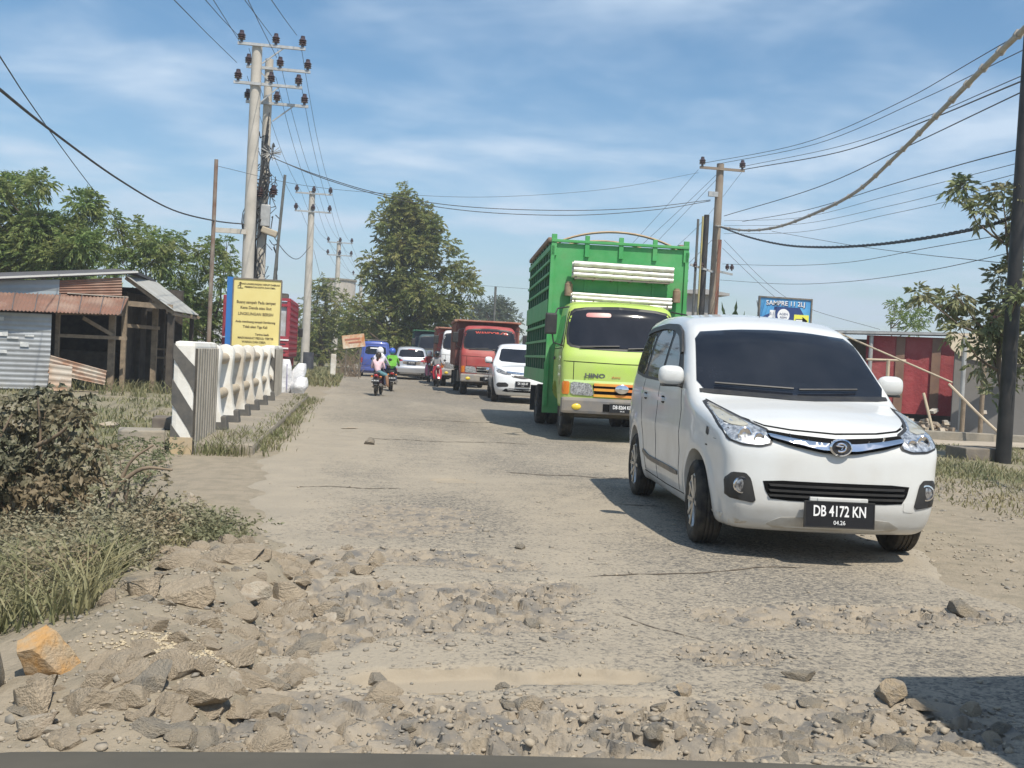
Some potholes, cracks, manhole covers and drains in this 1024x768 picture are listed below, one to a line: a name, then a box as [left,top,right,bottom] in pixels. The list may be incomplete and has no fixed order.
pothole [292,548,544,575]
pothole [206,688,1022,763]
crack [586,566,805,577]
pothole [260,578,593,658]
